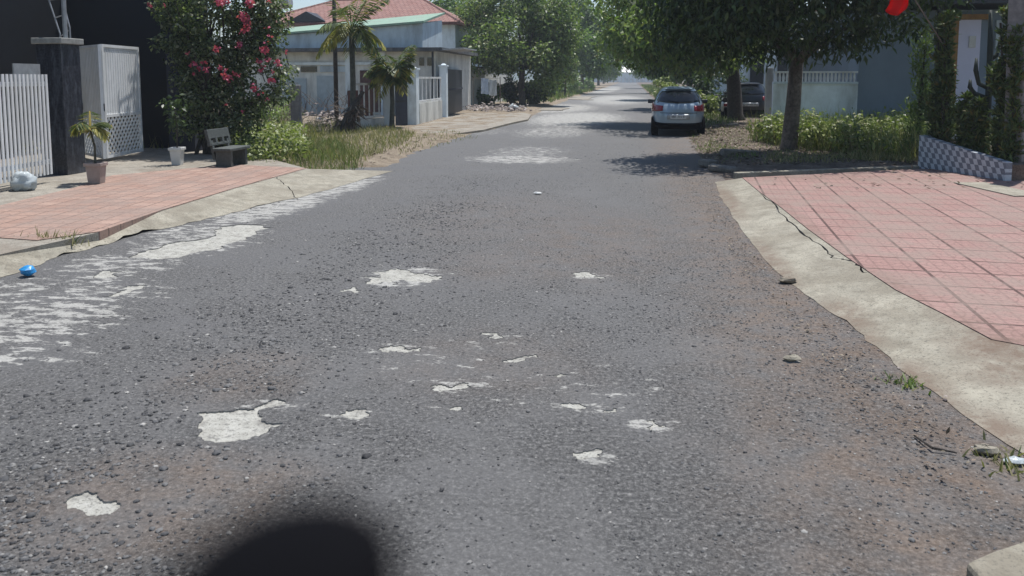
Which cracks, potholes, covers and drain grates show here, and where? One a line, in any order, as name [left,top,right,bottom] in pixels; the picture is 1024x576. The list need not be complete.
pothole [339,408,370,419]
pothole [128,224,270,259]
pothole [196,398,286,443]
pothole [63,490,122,516]
pothole [430,382,471,392]
pothole [572,448,603,461]
pothole [364,268,443,285]
crack [761,194,867,273]
pothole [93,270,122,278]
pothole [103,285,145,297]
